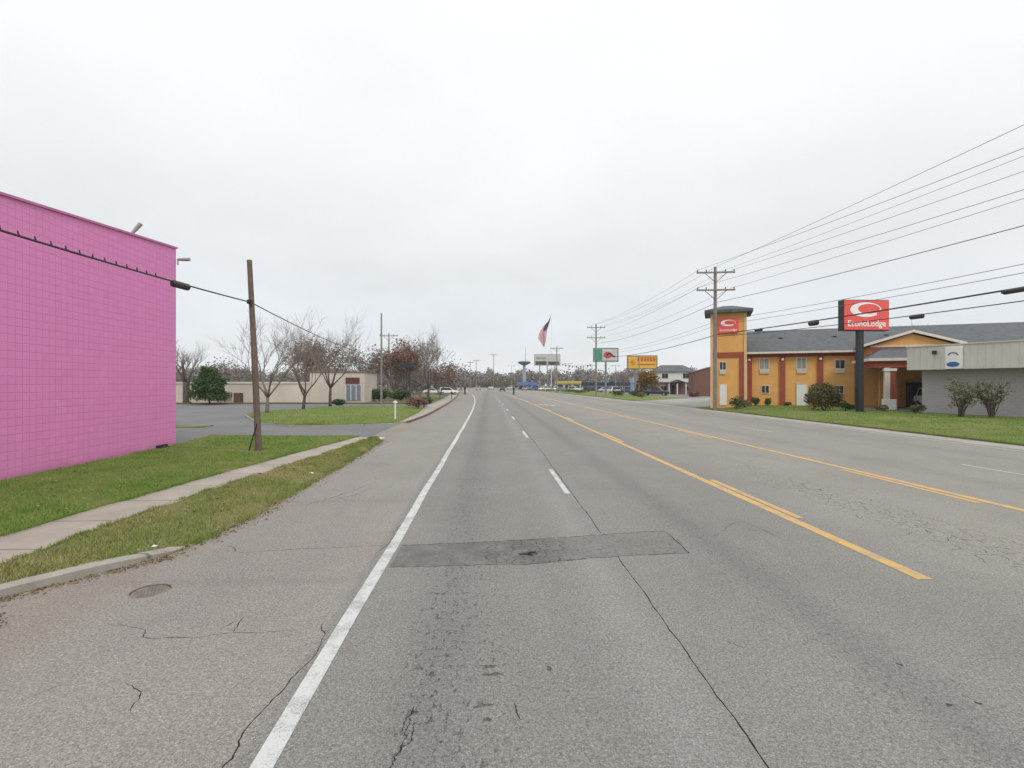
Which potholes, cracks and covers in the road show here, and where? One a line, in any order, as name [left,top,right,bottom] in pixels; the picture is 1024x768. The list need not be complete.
crack [230,519,405,565]
crack [222,625,330,768]
crack [389,707,417,768]
crack [118,618,291,639]
manhole cover [127,583,173,599]
